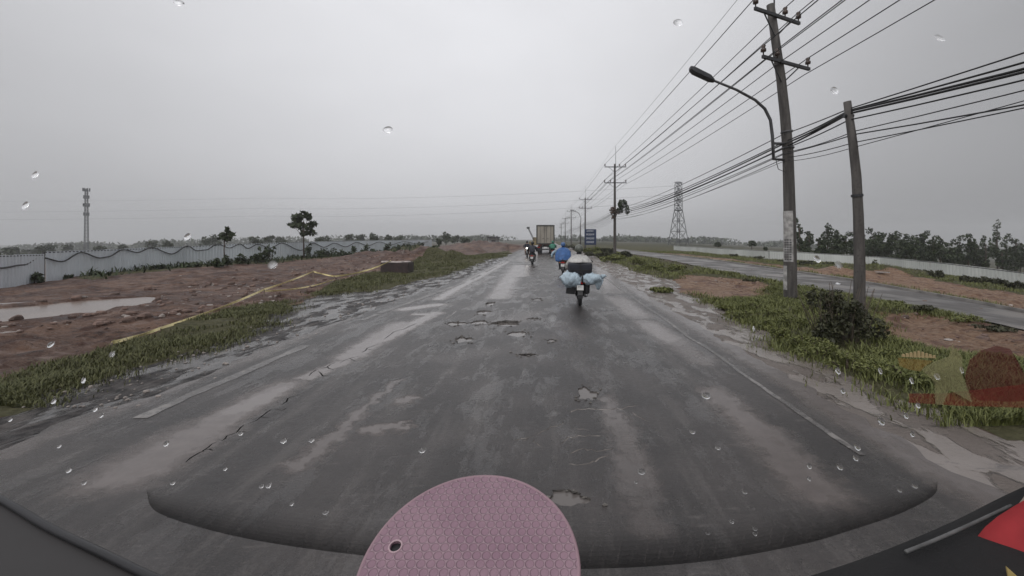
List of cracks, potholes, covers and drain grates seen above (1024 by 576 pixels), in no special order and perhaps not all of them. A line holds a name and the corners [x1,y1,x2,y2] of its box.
crack [309,325,412,376]
pothole [578,386,598,400]
crack [513,405,650,465]
crack [186,395,296,462]
pothole [550,489,591,506]
